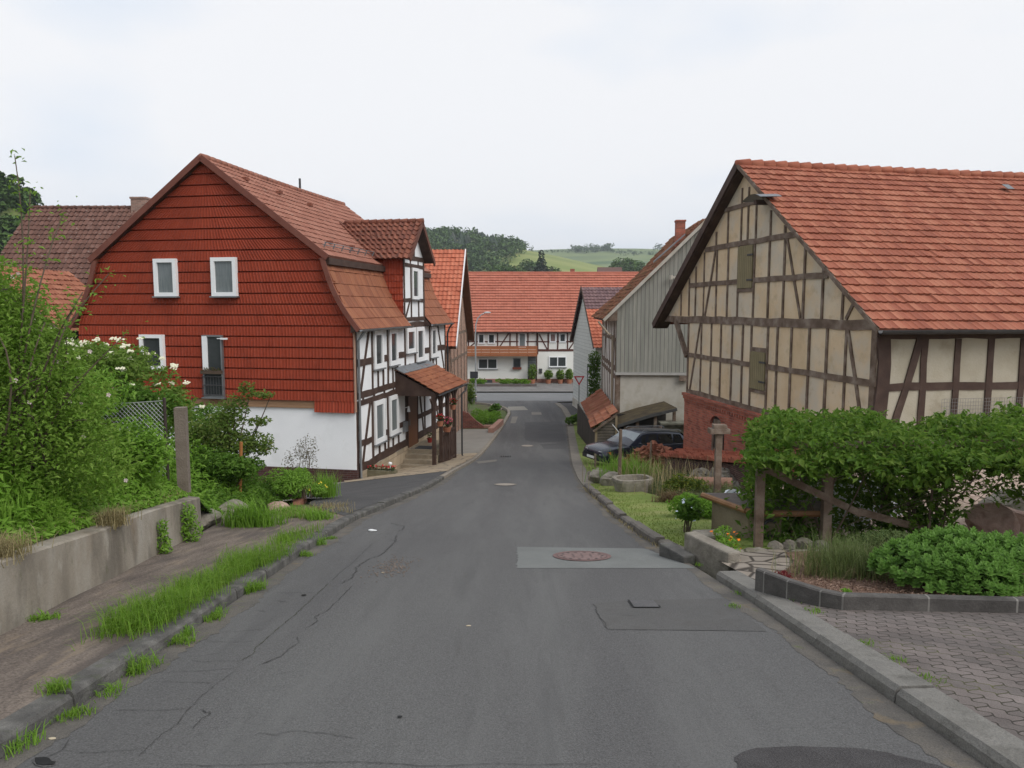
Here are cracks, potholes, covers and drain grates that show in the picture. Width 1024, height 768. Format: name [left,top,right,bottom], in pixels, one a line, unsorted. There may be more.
manhole cover [553,551,611,561]
crack [46,523,405,757]
utility cover [627,599,661,607]
